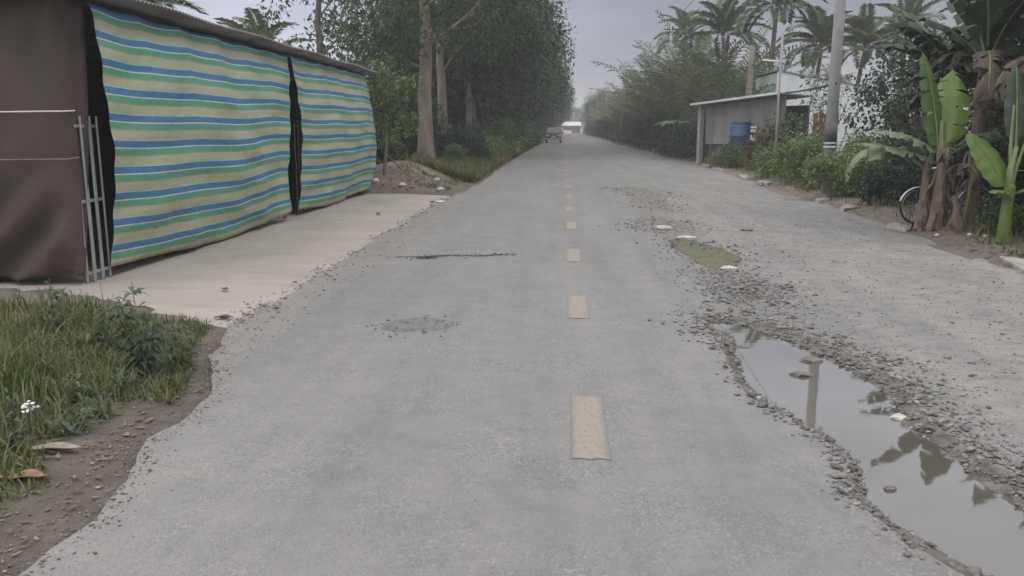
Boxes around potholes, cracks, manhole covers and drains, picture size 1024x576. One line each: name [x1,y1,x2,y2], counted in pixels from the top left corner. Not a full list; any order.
pothole [668,239,742,270]
pothole [700,315,1024,576]
pothole [381,318,455,333]
